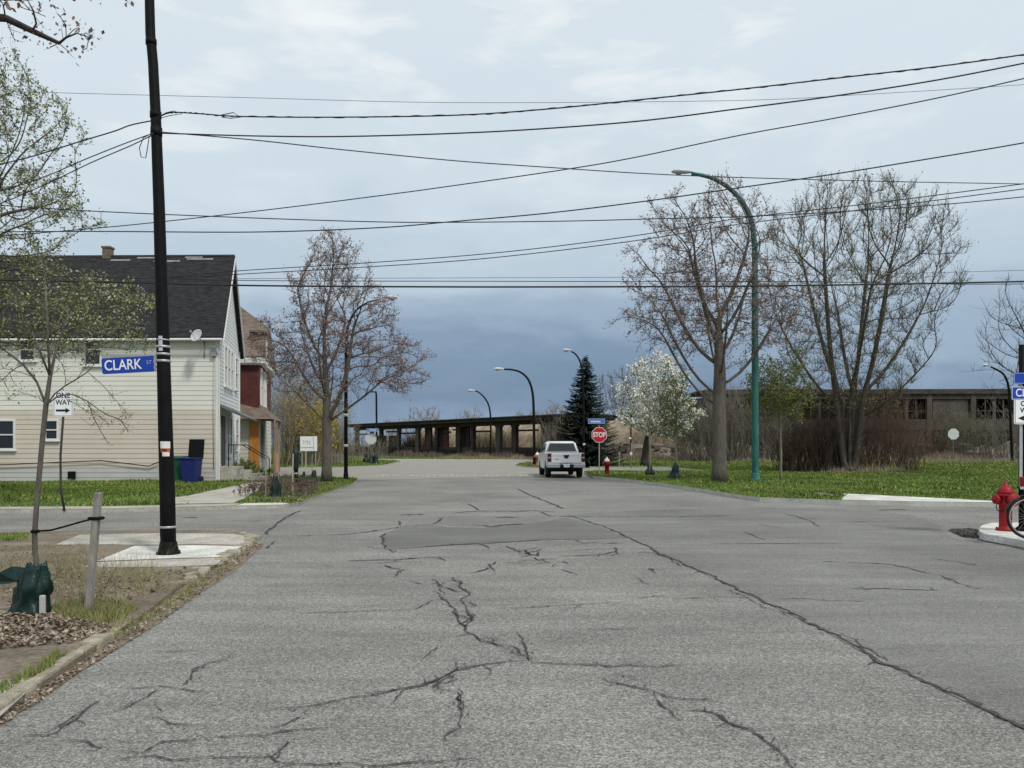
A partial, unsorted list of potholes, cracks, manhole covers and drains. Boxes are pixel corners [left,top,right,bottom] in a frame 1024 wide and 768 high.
crack [23,700,102,748]
crack [109,650,473,768]
pothole [948,528,979,539]
crack [784,557,980,601]
crack [262,504,797,768]
crack [743,514,833,544]
